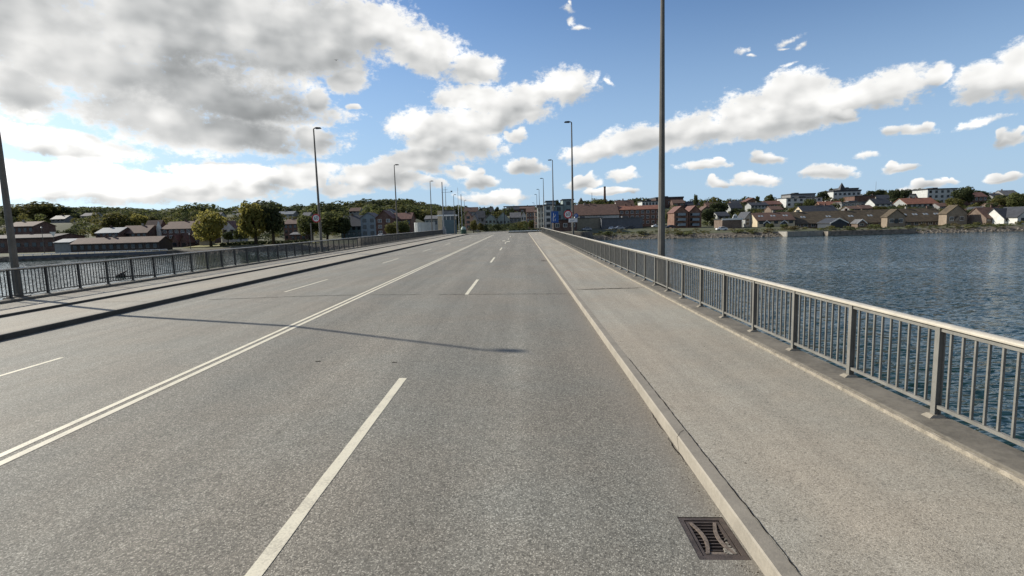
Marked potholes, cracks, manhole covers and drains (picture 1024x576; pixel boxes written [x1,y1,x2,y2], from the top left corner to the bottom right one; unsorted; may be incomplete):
drain grate [677,517,751,560]
